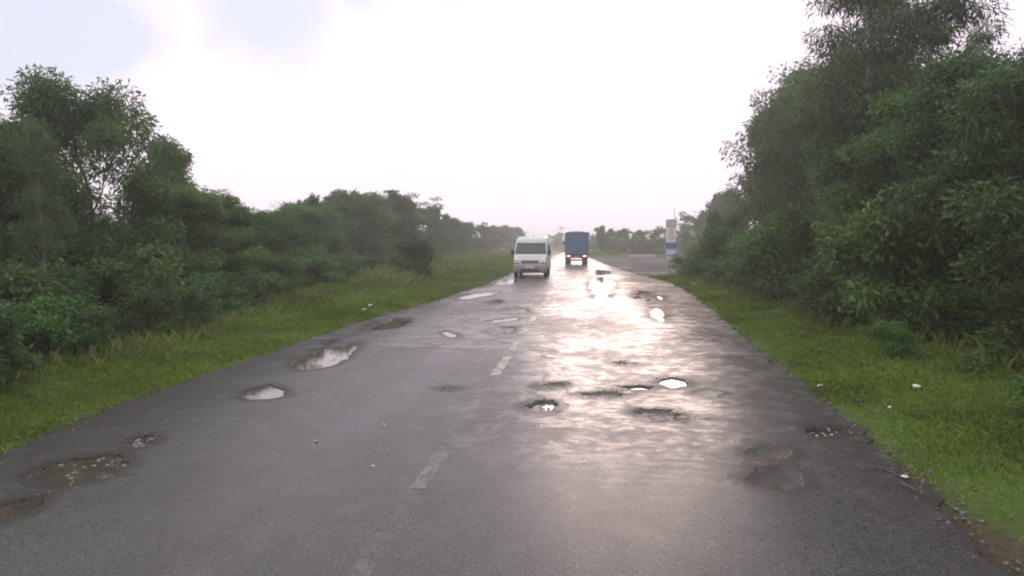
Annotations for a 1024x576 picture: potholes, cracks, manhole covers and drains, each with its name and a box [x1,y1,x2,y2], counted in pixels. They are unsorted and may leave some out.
pothole [538,381,567,389]
pothole [523,399,559,411]
pothole [744,445,792,459]
pothole [657,377,688,388]
pothole [633,290,653,304]
pothole [363,318,413,330]
pothole [291,342,362,370]
pothole [32,453,130,486]
pothole [579,391,627,399]
pothole [650,307,665,322]
pothole [238,384,285,400]
pothole [128,434,156,448]
